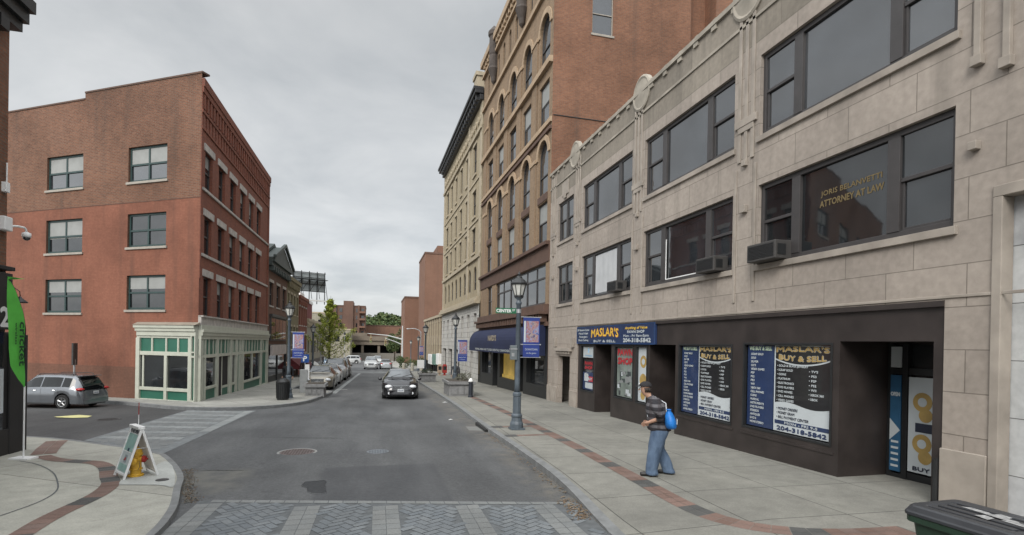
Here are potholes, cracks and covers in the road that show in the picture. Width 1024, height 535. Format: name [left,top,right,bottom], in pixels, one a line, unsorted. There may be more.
drain grate [466,422,488,432]
